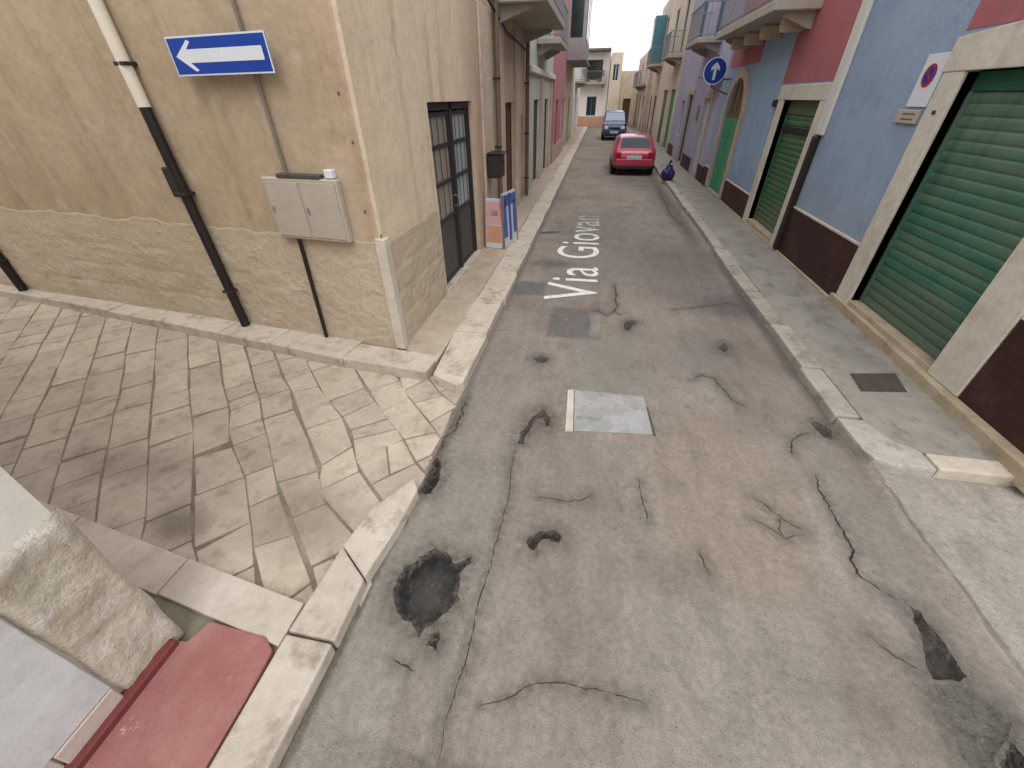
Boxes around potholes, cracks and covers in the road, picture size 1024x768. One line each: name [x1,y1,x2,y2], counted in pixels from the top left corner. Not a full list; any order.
crack [691,374,743,406]
crack [437,449,516,767]
pothole [393,548,471,639]
pothole [910,606,967,682]
pothole [420,457,441,494]
pothole [526,530,562,550]
crack [480,681,645,706]
pothole [518,410,551,445]
pothole [426,631,440,650]
crack [752,478,897,599]
